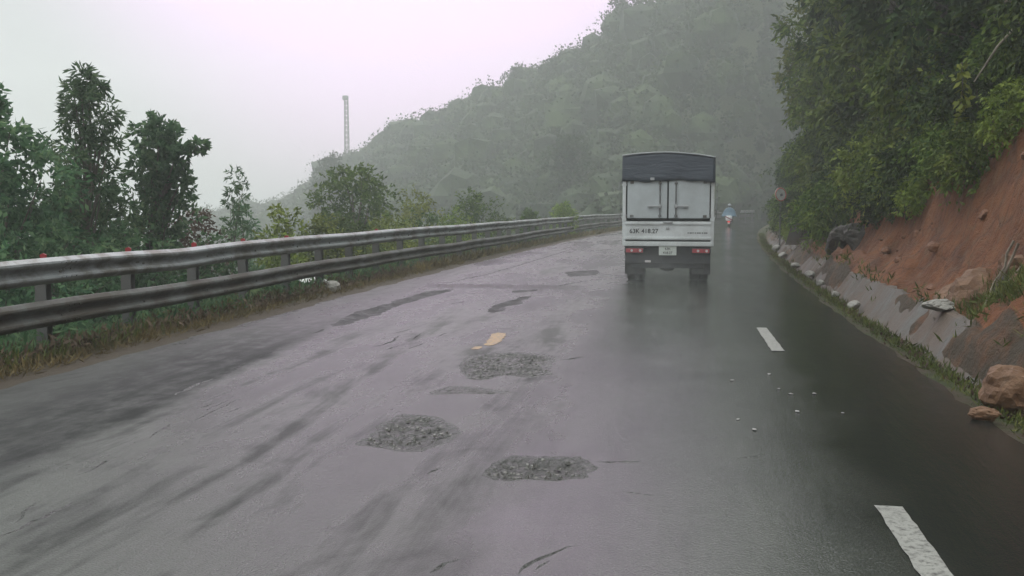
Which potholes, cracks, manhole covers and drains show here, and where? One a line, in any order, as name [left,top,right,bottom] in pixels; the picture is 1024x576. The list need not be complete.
pothole [481,455,598,481]
pothole [459,352,555,381]
crack [188,399,241,424]
crack [150,424,179,438]
crack [378,329,446,349]
crack [430,559,461,573]
crack [518,545,578,574]
pothole [355,414,463,452]
crack [0,501,73,537]
